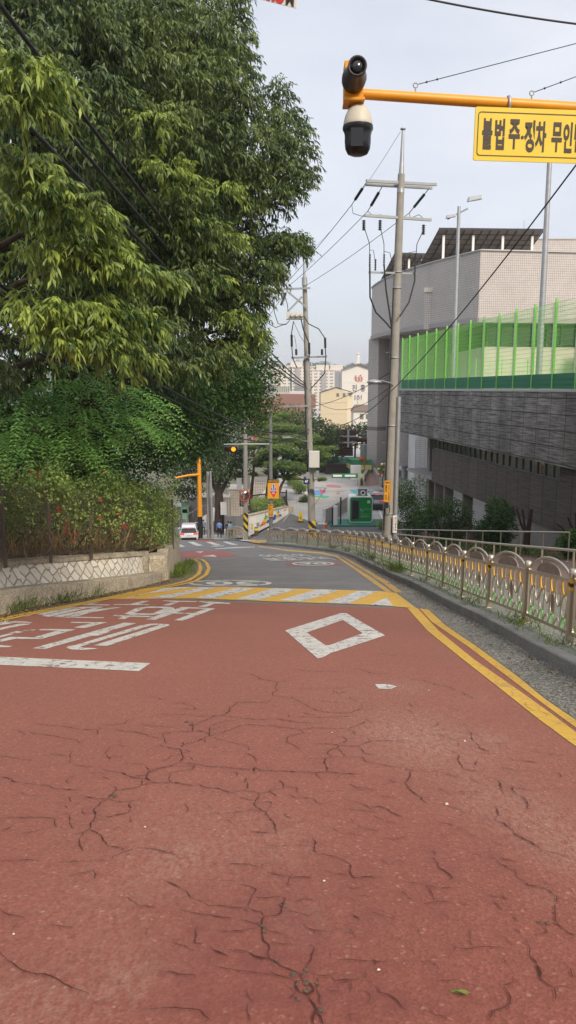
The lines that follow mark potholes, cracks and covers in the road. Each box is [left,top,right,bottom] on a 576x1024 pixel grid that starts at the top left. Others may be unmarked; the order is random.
crack [0,952,89,994]
crack [167,862,406,1024]
crack [409,678,576,999]
crack [5,674,481,937]
crack [473,982,512,1019]
